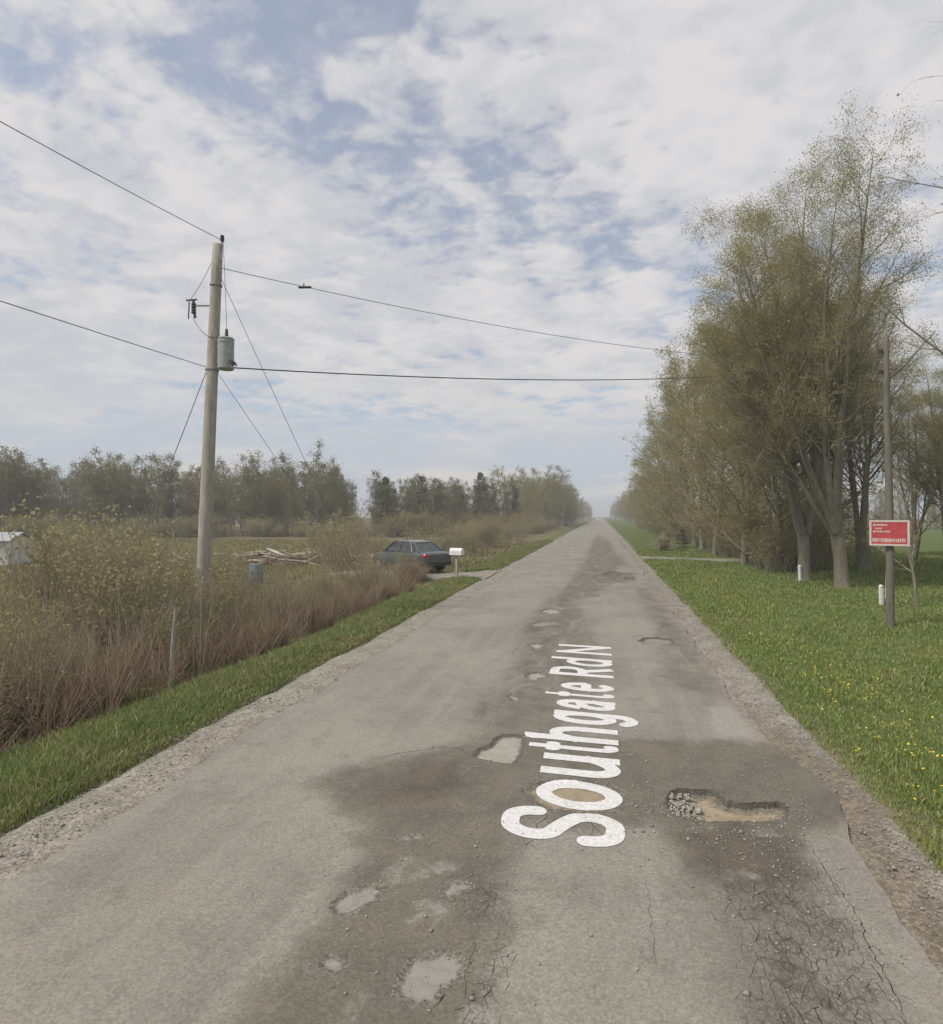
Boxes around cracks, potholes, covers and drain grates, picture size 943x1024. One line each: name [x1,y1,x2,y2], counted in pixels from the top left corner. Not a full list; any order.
pothole [519,778,629,815]
crack [711,837,910,1024]
pothole [637,637,675,645]
crack [427,877,517,1024]
pothole [663,788,790,823]
